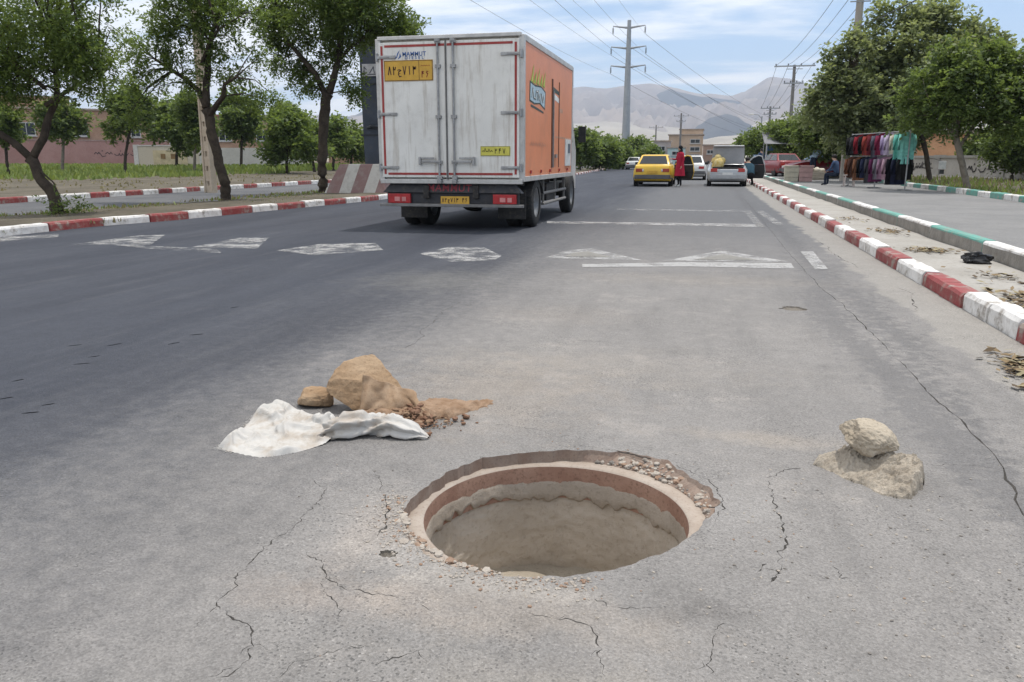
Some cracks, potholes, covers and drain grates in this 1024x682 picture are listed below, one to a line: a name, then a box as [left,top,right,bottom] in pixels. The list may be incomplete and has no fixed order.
crack [282,645,423,675]
crack [196,475,390,678]
crack [305,551,431,617]
crack [759,467,800,582]
crack [696,623,724,674]
crack [530,599,650,675]
